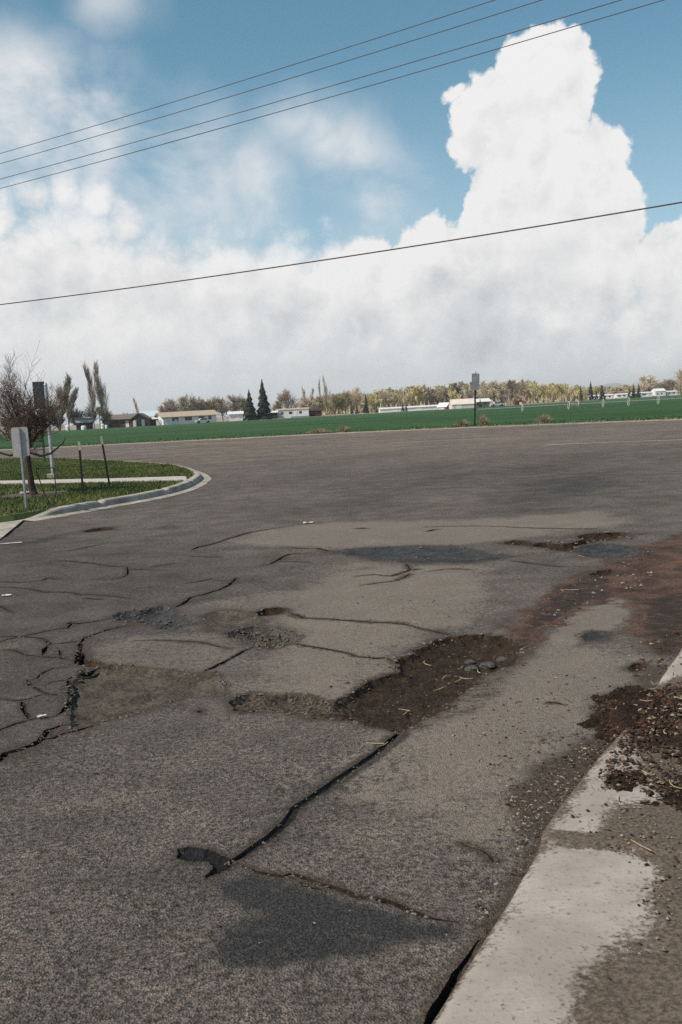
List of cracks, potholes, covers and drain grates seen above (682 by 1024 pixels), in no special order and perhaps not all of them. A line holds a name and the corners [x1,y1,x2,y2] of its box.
crack [363,564,470,585]
crack [176,847,459,923]
pothole [503,532,627,552]
crack [174,578,237,608]
crack [139,640,256,671]
crack [11,544,175,600]
pothole [228,634,525,733]
pothole [224,626,301,649]
pothole [112,605,188,630]
crack [192,528,276,557]
pothole [573,544,656,558]
crack [0,618,134,762]
